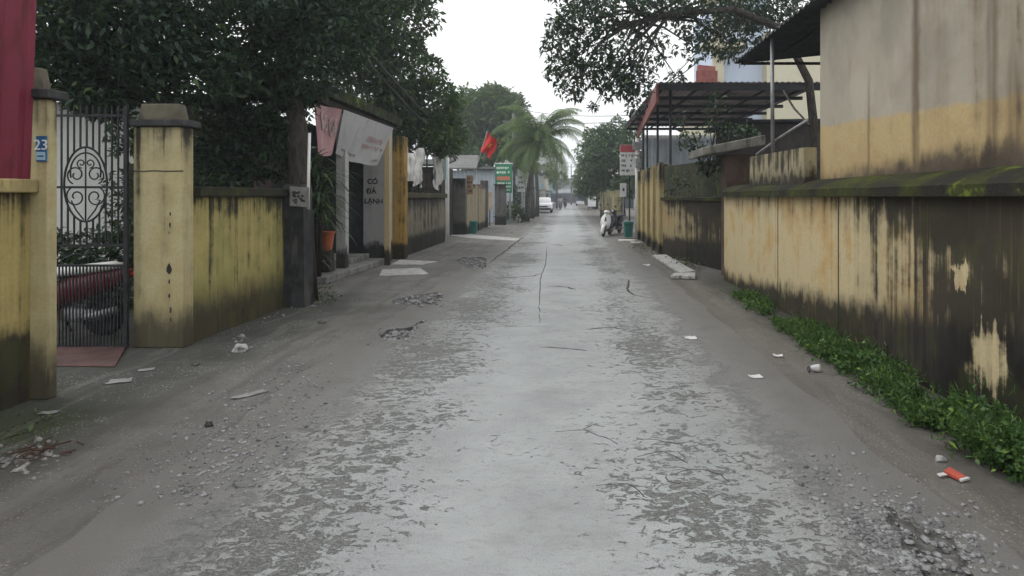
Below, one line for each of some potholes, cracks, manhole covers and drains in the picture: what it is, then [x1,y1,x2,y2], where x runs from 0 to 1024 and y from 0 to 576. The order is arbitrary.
pothole [378,317,428,340]
crack [555,425,730,497]
pothole [881,504,974,576]
pothole [454,257,488,269]
crack [490,237,573,327]
pothole [389,292,443,308]
